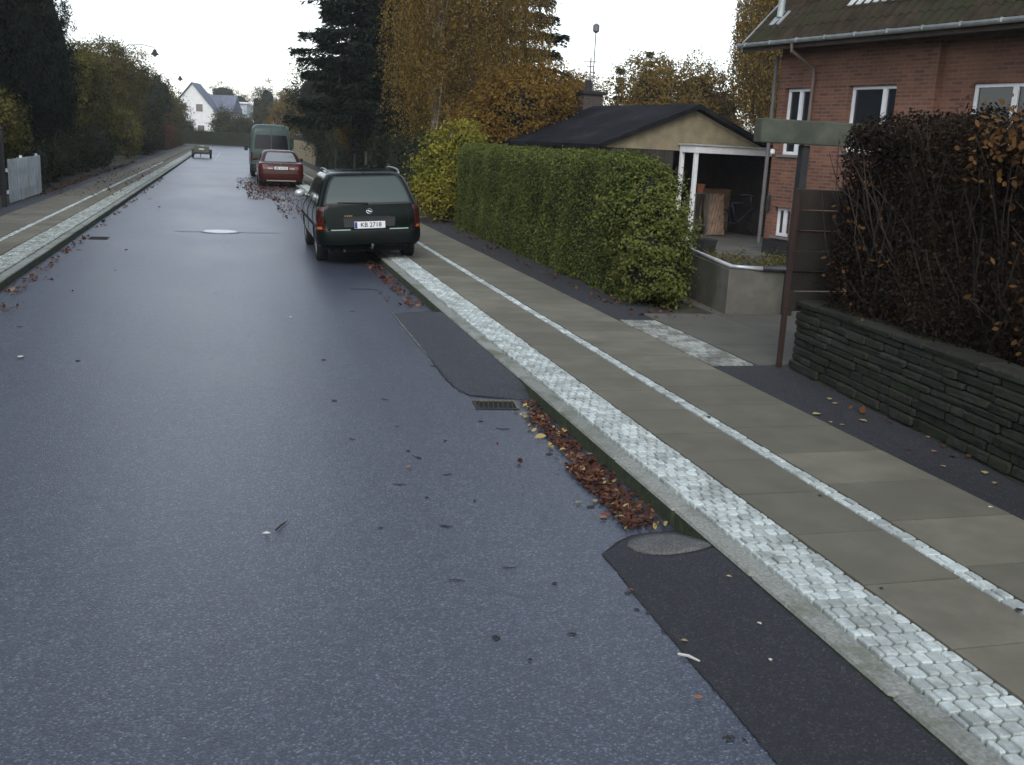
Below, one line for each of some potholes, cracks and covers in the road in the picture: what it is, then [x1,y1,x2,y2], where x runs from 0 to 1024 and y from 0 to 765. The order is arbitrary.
drain grate [472,399,520,410]
